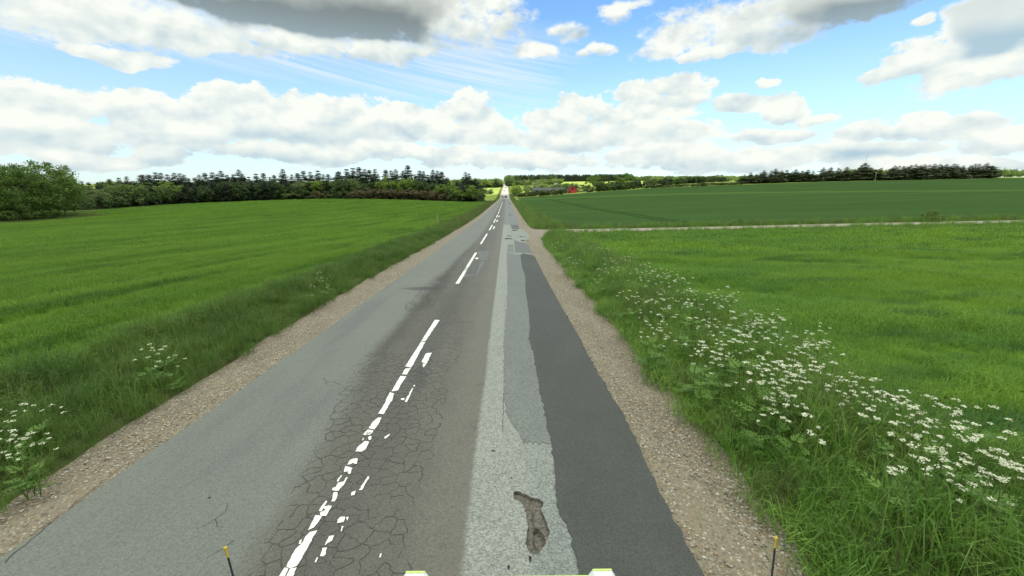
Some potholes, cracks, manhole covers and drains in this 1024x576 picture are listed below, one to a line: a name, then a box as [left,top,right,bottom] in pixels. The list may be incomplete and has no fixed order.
crack [253,261,473,576]
pothole [513,491,550,555]
